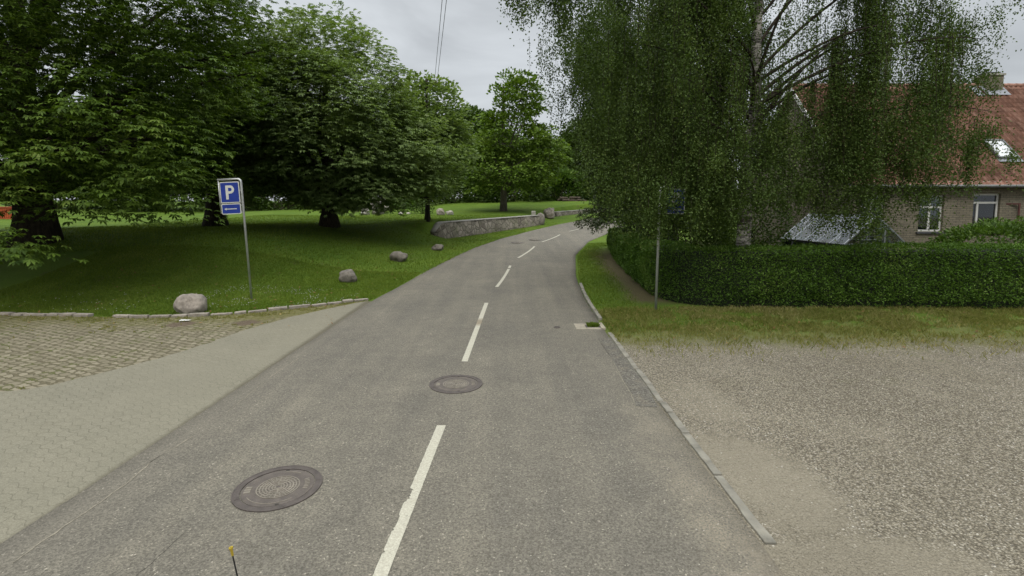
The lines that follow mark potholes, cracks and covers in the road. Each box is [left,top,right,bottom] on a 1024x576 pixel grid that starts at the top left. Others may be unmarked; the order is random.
manhole cover [429,375,483,394]
drain grate [574,322,606,330]
manhole cover [231,465,323,512]
